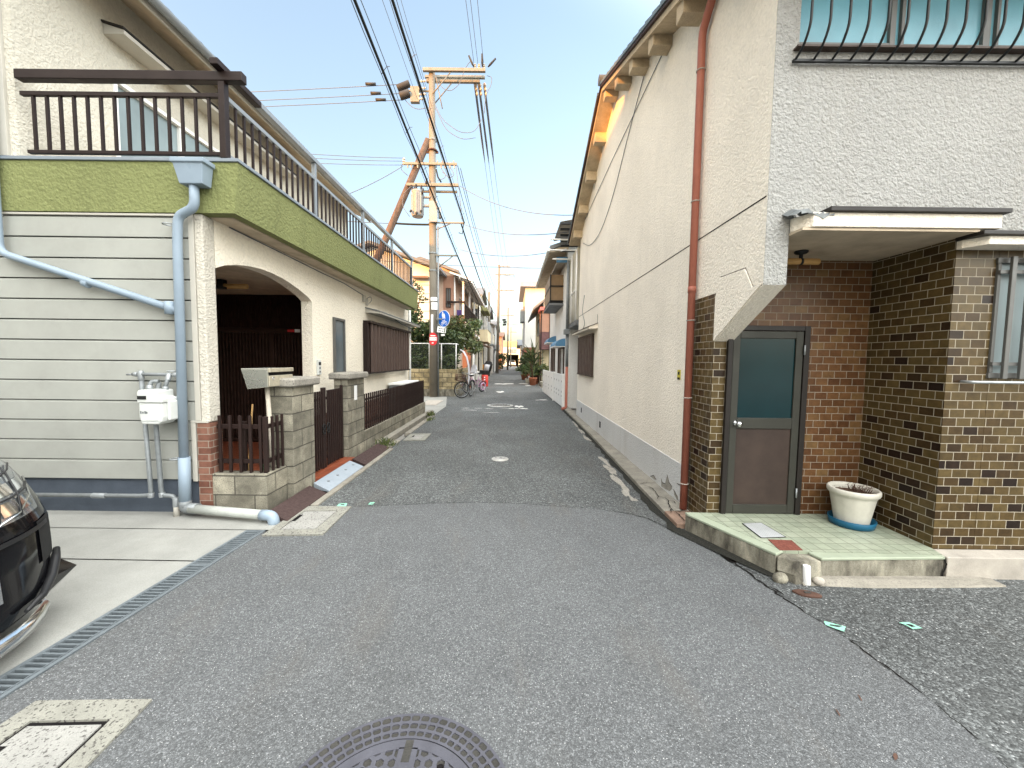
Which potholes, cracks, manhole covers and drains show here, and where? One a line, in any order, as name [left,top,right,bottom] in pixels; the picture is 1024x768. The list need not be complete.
drain grate [0,530,266,700]
manhole cover [298,713,505,768]
